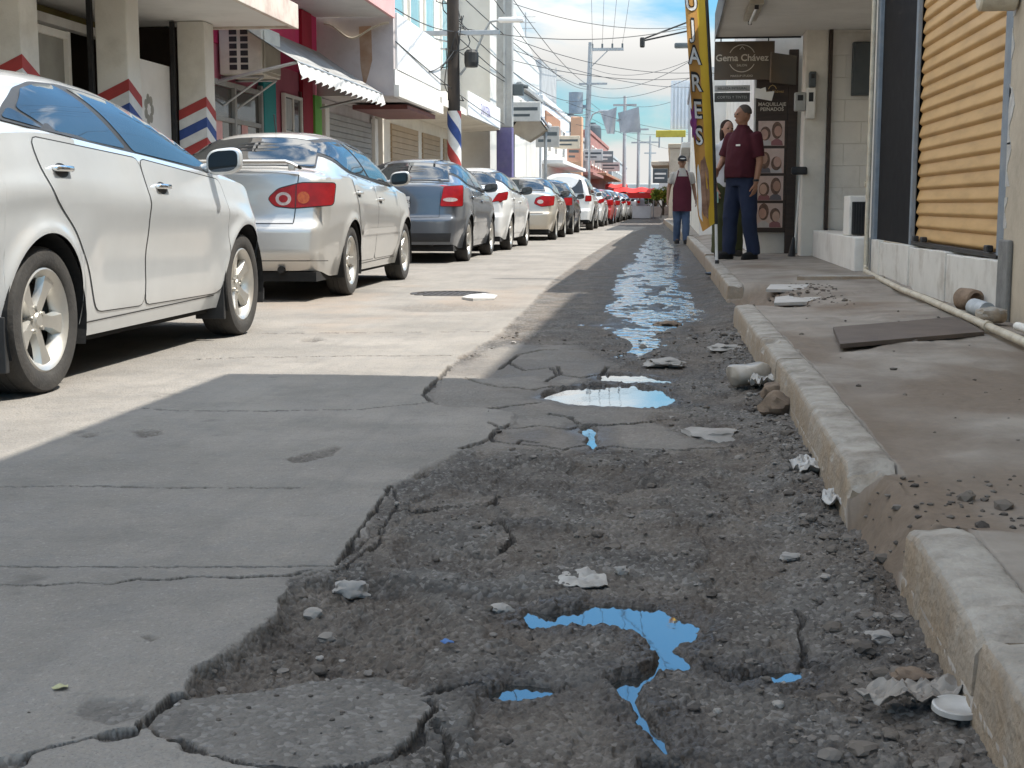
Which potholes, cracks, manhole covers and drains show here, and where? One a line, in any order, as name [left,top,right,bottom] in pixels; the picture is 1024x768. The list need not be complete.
pothole [516,599,703,753]
crack [0,484,516,587]
pothole [538,381,681,408]
crack [143,349,734,451]
crack [26,680,482,768]
pothole [576,425,603,451]
